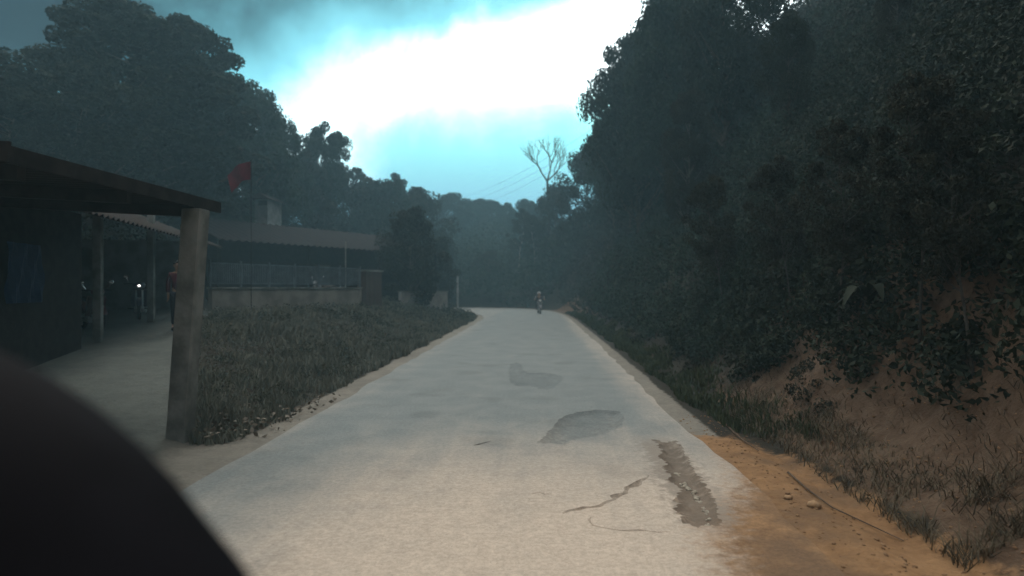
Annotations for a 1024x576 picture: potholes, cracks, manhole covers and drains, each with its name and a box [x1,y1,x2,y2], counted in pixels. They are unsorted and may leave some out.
pothole [652,439,722,529]
crack [563,475,671,533]
